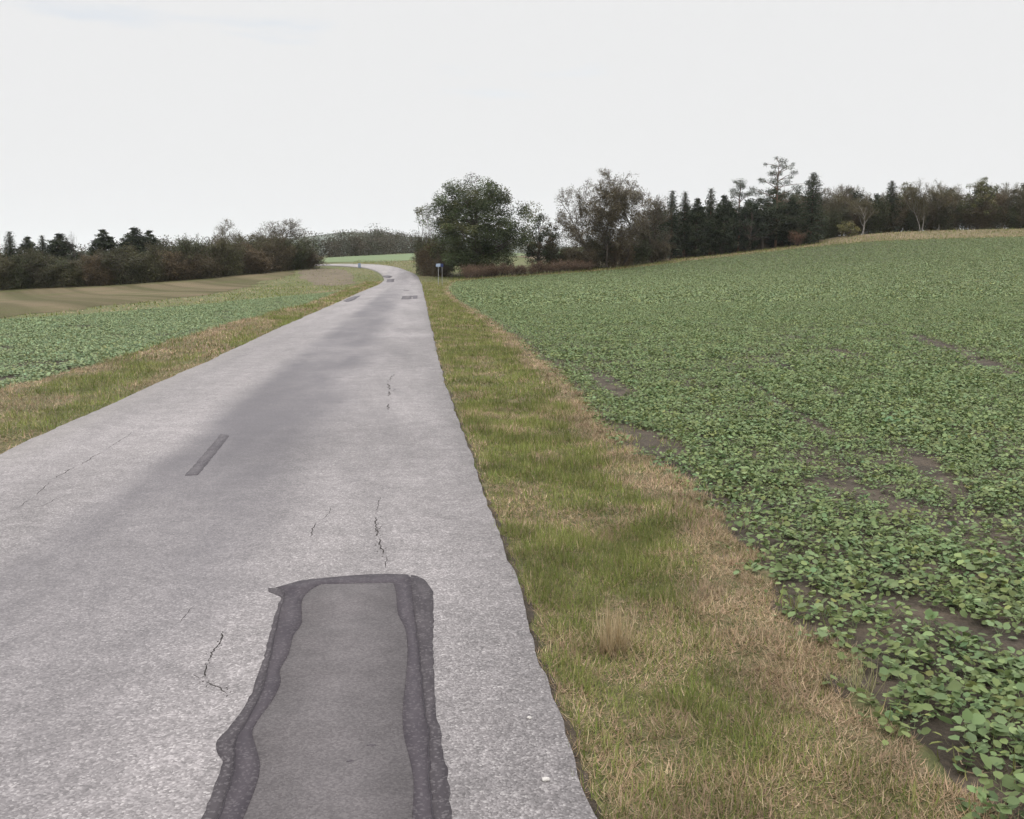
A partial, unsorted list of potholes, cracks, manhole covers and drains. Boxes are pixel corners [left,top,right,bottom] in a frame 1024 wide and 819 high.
crack [193,631,231,697]
crack [373,499,387,567]
